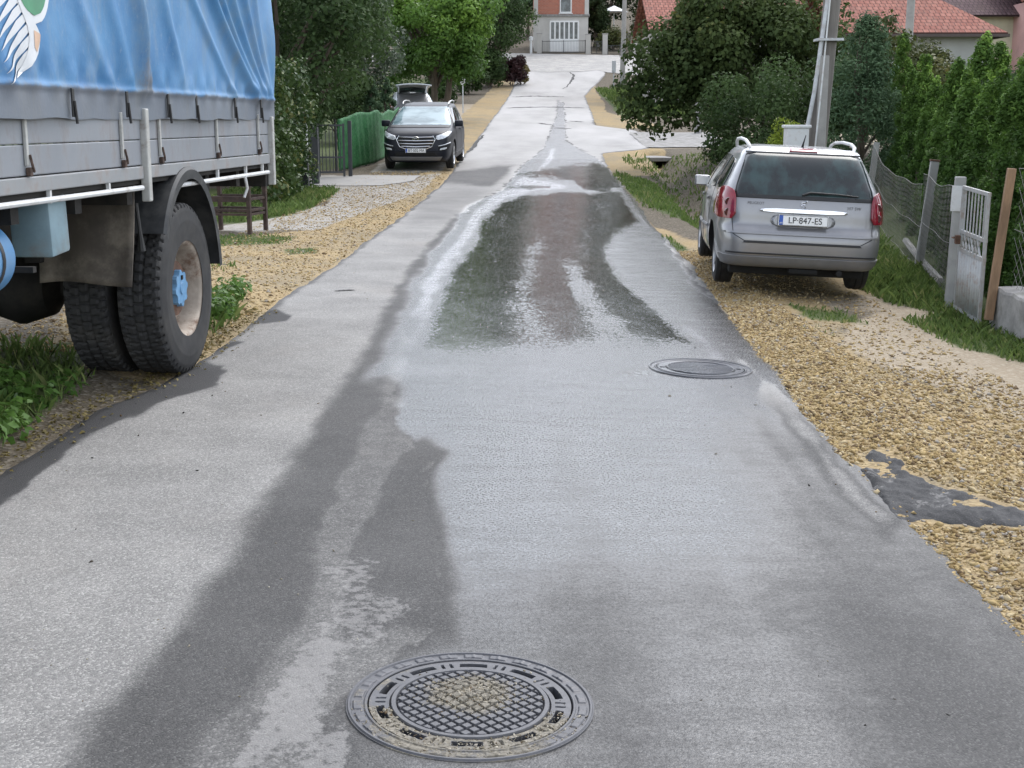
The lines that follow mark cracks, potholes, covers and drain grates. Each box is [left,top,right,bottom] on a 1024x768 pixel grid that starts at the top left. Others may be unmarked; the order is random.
manhole cover [346,652,594,763]
manhole cover [648,358,753,379]
